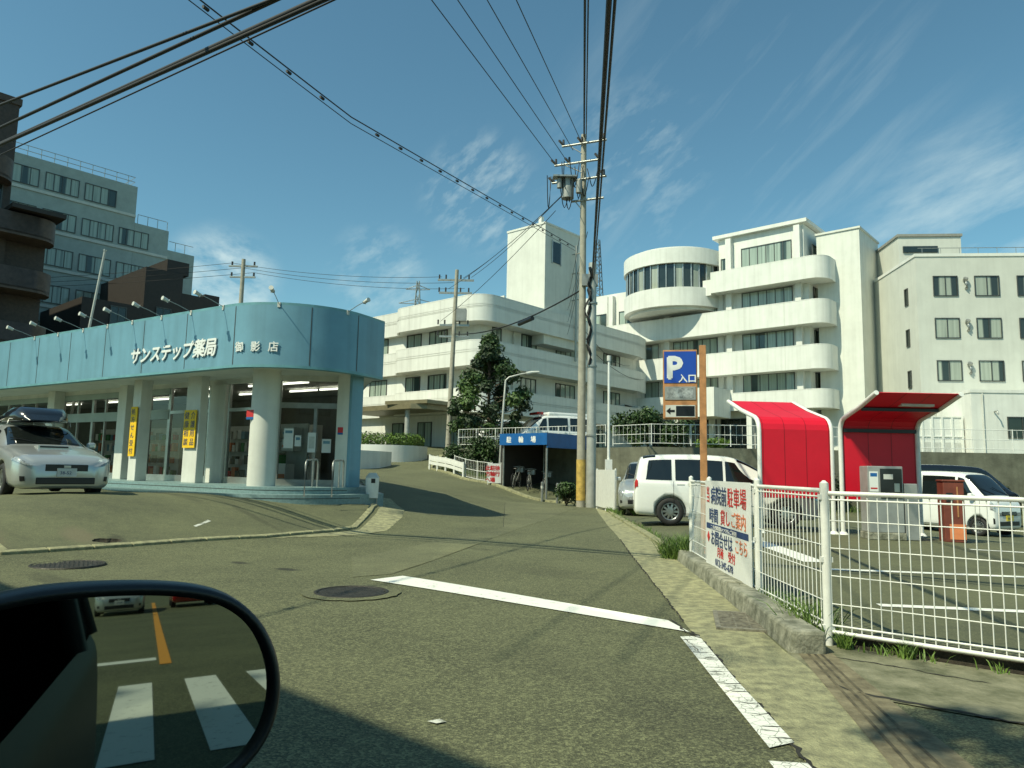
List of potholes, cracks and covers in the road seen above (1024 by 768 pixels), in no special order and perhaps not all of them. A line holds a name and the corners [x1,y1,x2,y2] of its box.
manhole cover [301,584,401,601]
manhole cover [28,560,106,570]
